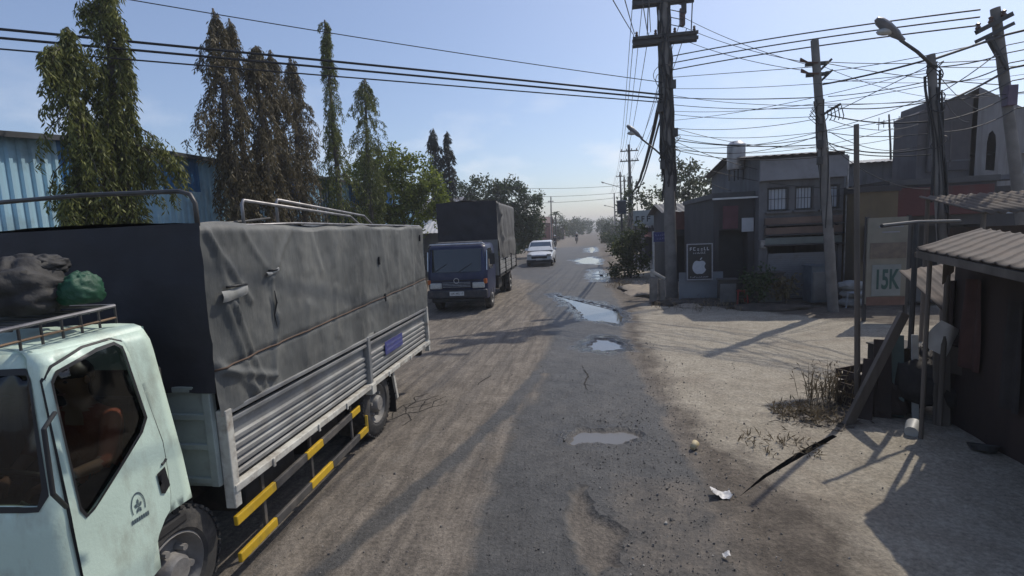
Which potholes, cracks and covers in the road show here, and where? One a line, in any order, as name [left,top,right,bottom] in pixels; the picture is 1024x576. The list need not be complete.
pothole [574,257,603,265]
crack [390,393,445,425]
pothole [561,483,630,576]
pothole [553,294,626,324]
pothole [563,425,646,448]
pothole [591,269,607,282]
pothole [586,337,625,352]
